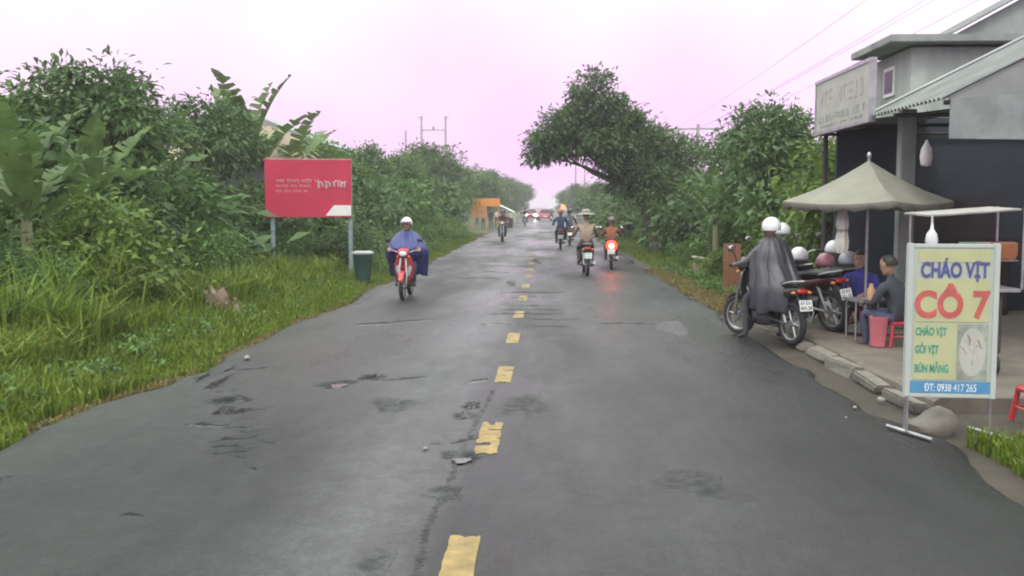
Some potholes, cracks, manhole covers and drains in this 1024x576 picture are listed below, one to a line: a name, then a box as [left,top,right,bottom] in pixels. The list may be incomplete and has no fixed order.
pothole [207,396,237,406]
pothole [192,364,237,384]
pothole [355,372,389,381]
pothole [451,410,477,421]
pothole [312,379,364,390]
pothole [209,406,237,415]
pothole [201,372,237,392]
pothole [461,401,481,410]
crack [431,437,479,445]
